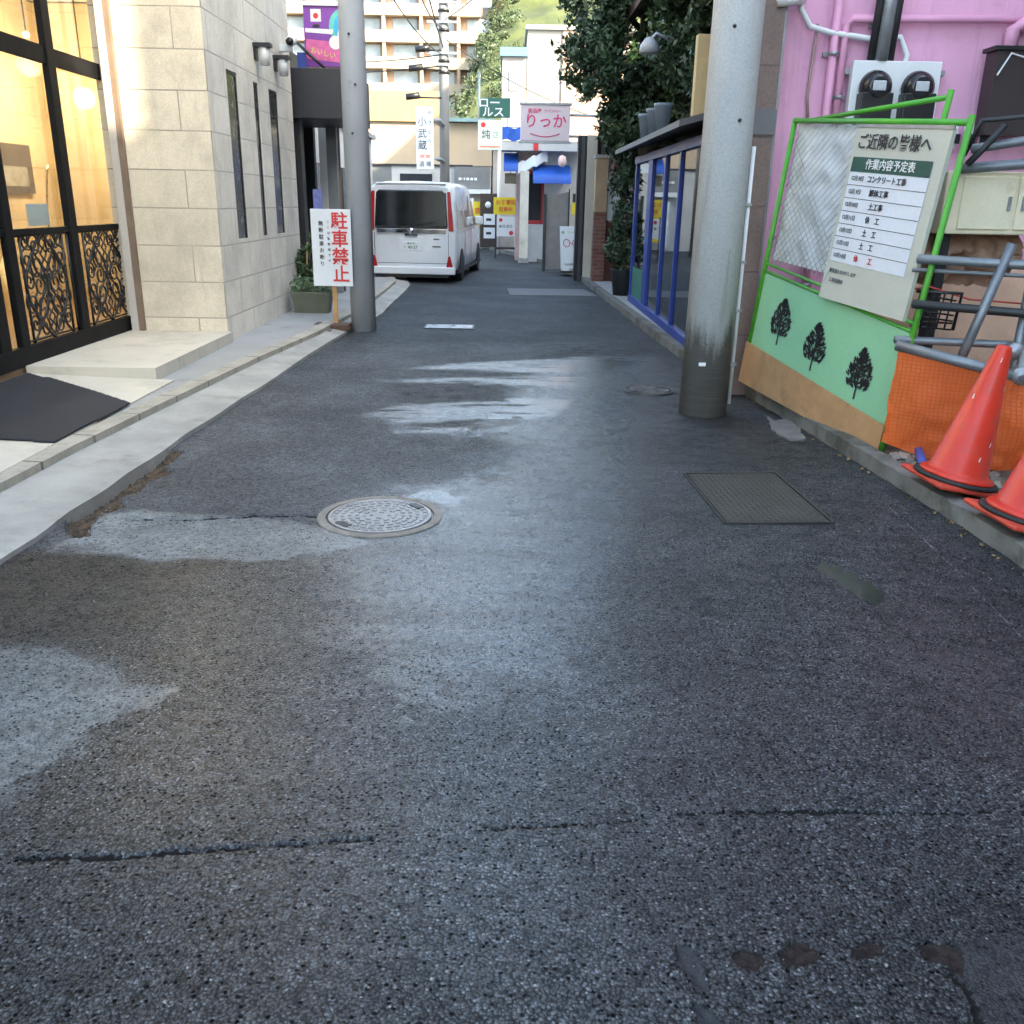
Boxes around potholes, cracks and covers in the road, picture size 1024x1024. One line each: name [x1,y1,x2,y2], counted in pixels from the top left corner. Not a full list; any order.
pothole [915,944,964,976]
pothole [731,951,765,971]
manhole cover [317,496,442,538]
pothole [675,945,709,994]
pothole [778,941,820,969]
pothole [692,1004,723,1024]
manhole cover [683,472,835,525]
manhole cover [622,384,675,396]
pothole [852,942,884,959]
